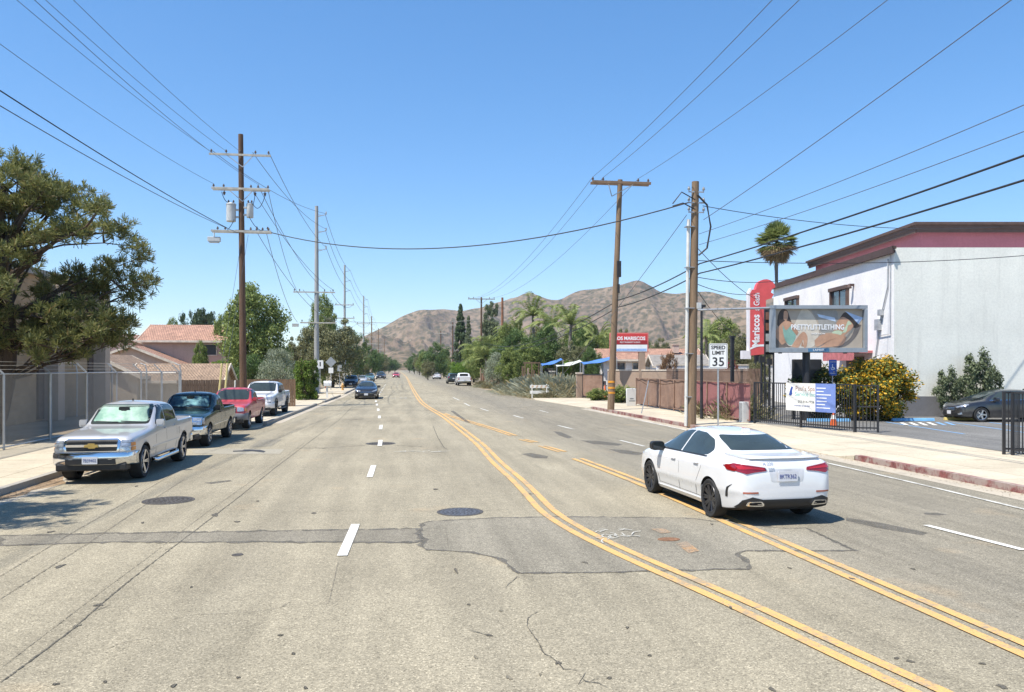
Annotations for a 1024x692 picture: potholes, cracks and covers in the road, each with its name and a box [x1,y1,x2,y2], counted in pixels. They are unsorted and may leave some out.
crack [527,612,607,687]
manhole cover [437,508,483,516]
manhole cover [141,496,195,505]
